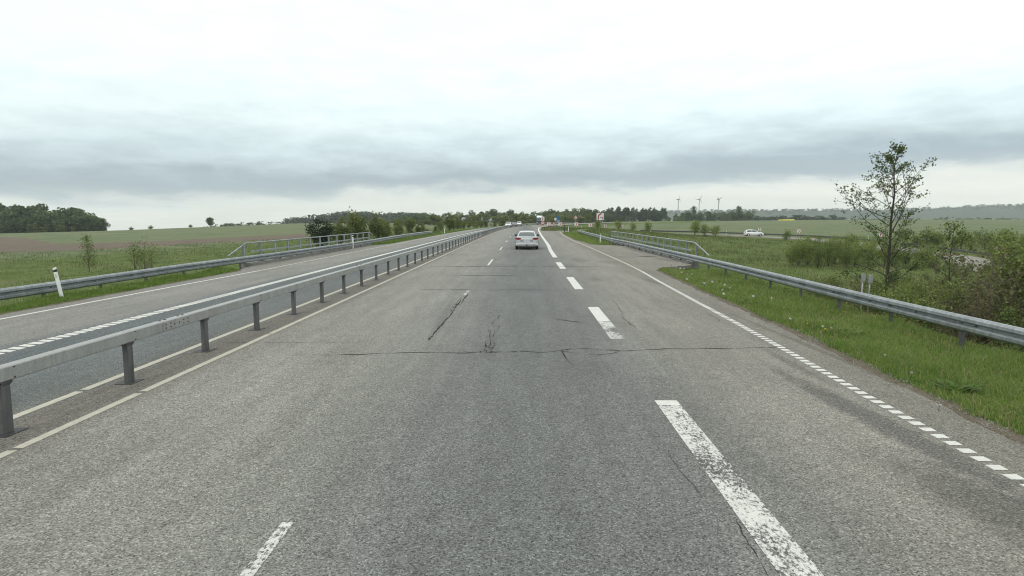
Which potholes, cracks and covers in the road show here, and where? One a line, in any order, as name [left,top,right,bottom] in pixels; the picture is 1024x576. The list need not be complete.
crack [337,266,756,365]
crack [717,520,768,575]
